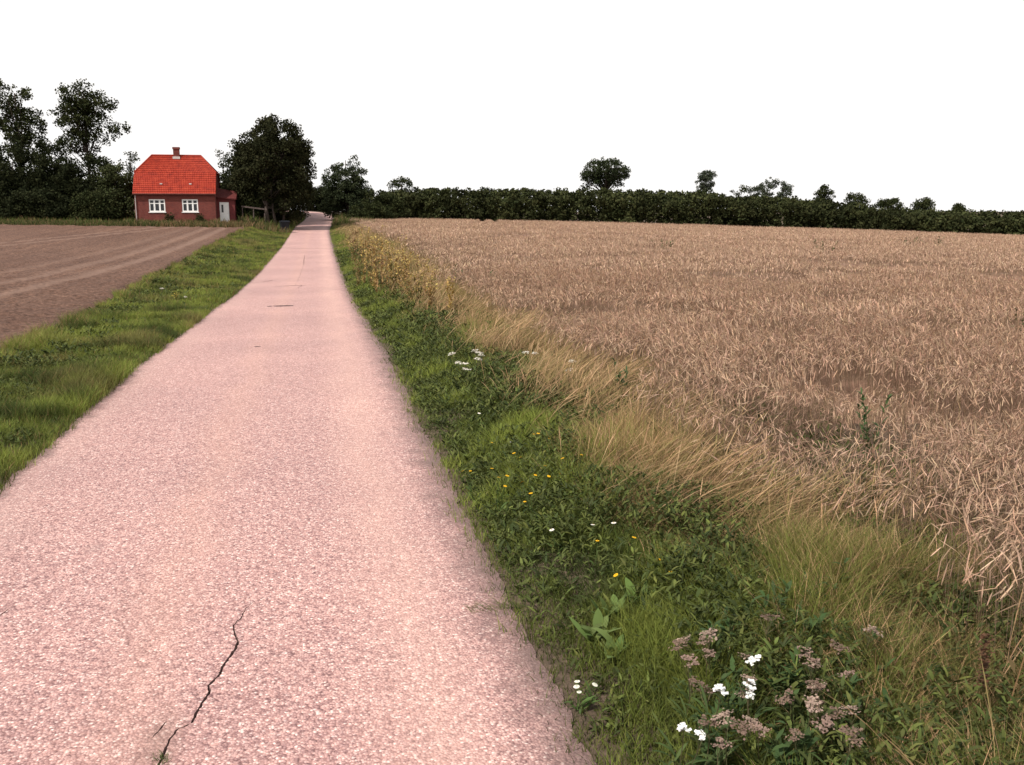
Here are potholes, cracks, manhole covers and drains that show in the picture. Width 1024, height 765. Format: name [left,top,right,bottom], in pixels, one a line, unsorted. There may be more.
crack [152,597,263,764]
